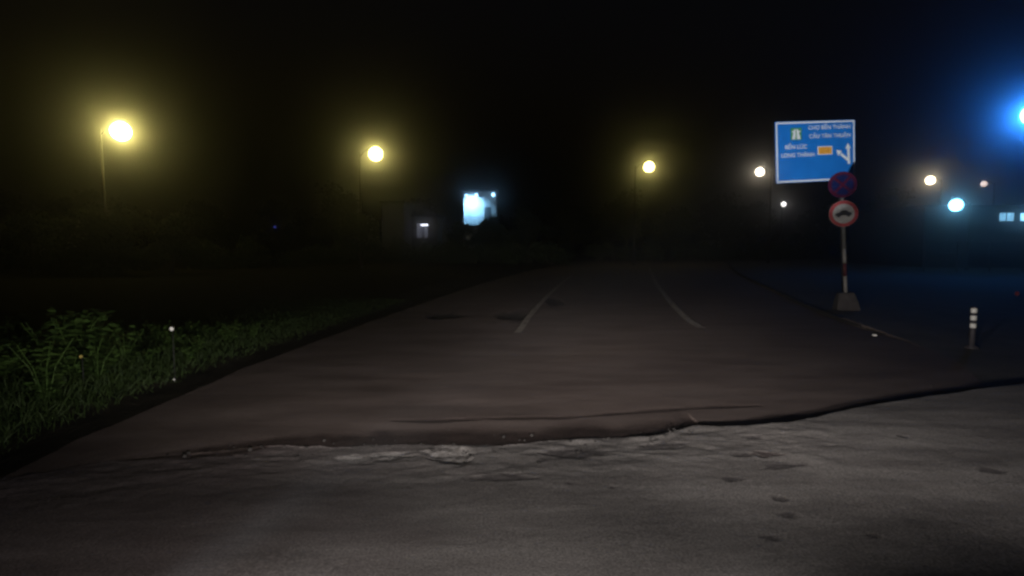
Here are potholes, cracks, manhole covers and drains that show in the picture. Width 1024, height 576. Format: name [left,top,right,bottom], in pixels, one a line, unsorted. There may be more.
pothole [332,454,374,465]
pothole [419,308,478,321]
pothole [720,474,748,483]
pothole [365,450,434,461]
pothole [751,460,817,470]
pothole [970,466,1012,475]
pothole [421,445,485,468]
pothole [493,309,536,324]
pothole [766,492,793,502]
